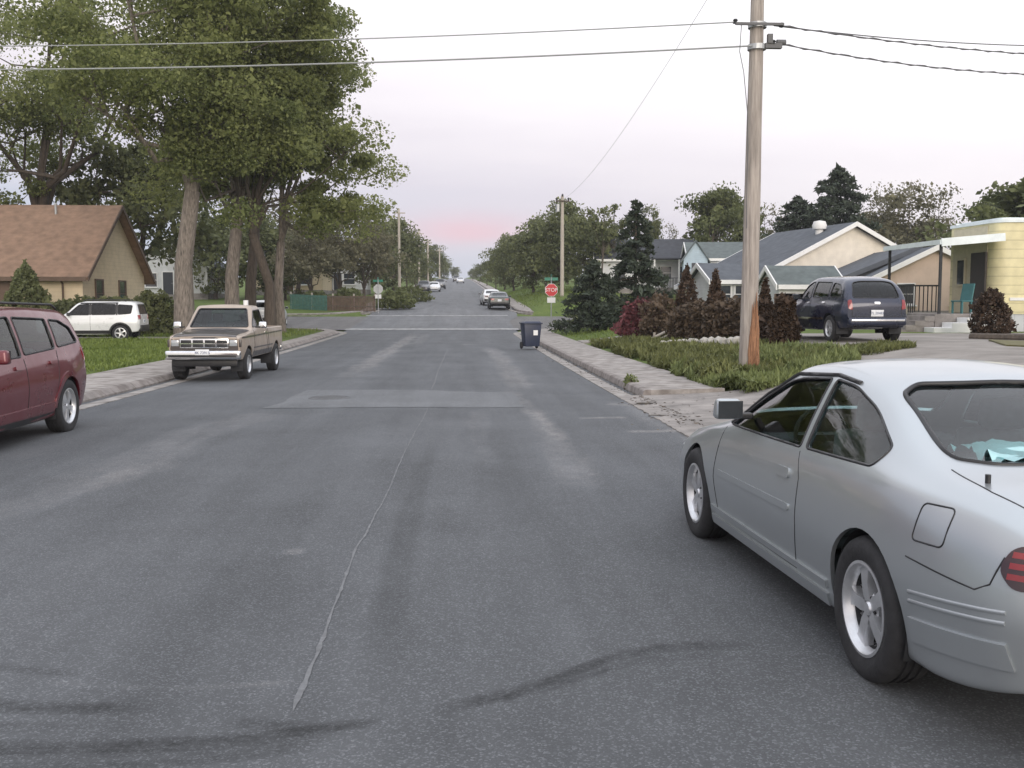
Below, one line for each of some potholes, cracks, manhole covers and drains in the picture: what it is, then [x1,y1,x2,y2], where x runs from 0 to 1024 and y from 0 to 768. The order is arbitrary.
crack [292,408,428,712]
